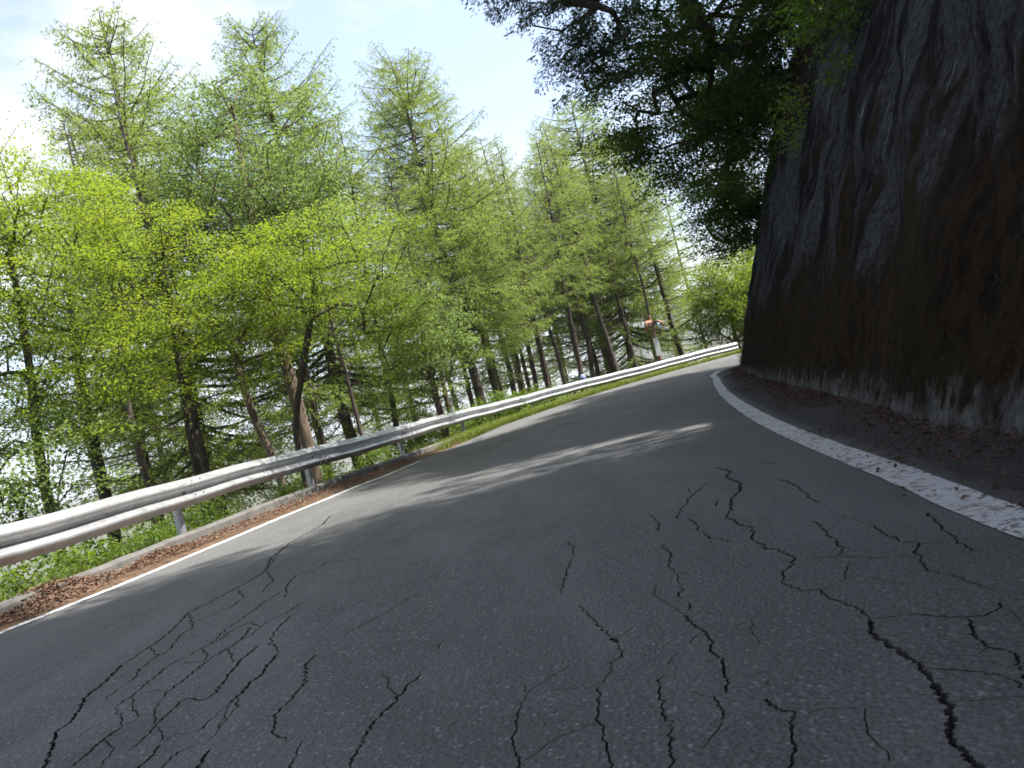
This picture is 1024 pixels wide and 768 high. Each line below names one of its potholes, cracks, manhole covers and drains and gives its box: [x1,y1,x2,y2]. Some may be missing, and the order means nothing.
crack [510,541,633,768]
crack [648,514,760,768]
crack [675,468,1024,768]
crack [41,516,379,768]
crack [348,674,420,768]
